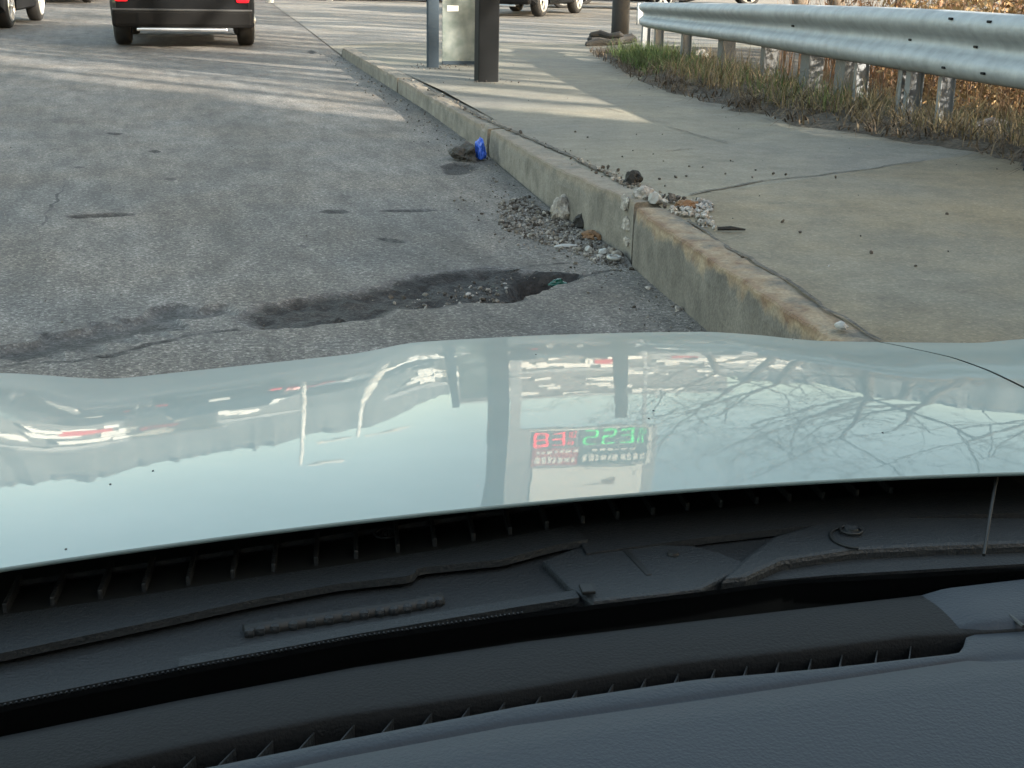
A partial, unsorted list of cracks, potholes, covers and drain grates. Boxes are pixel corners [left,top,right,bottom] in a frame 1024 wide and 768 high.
crack [41,185,137,226]
crack [0,301,242,368]
pothole [235,266,589,332]
